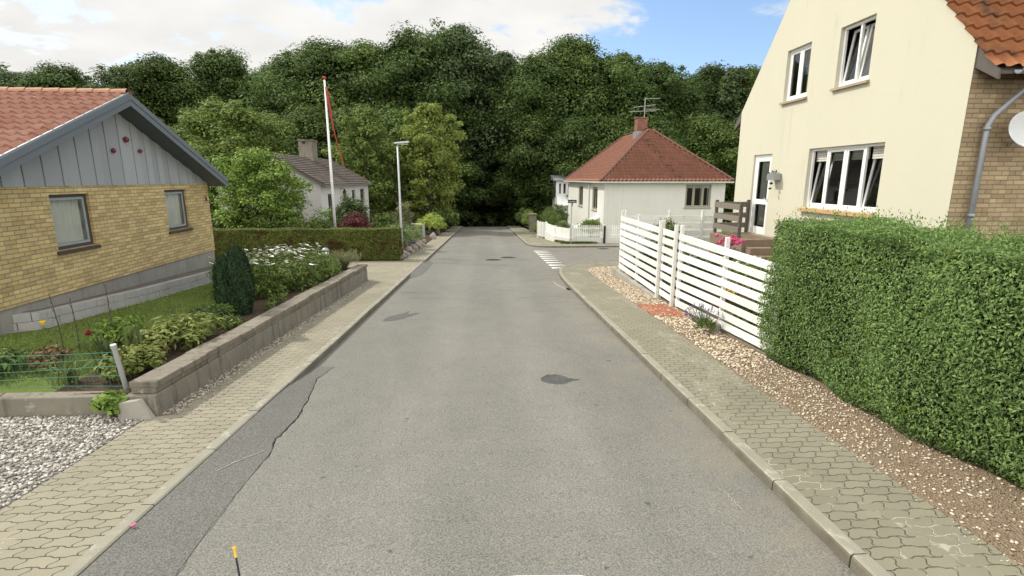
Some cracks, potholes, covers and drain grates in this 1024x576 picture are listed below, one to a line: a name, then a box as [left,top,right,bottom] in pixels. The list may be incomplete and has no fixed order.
crack [177,368,333,575]
